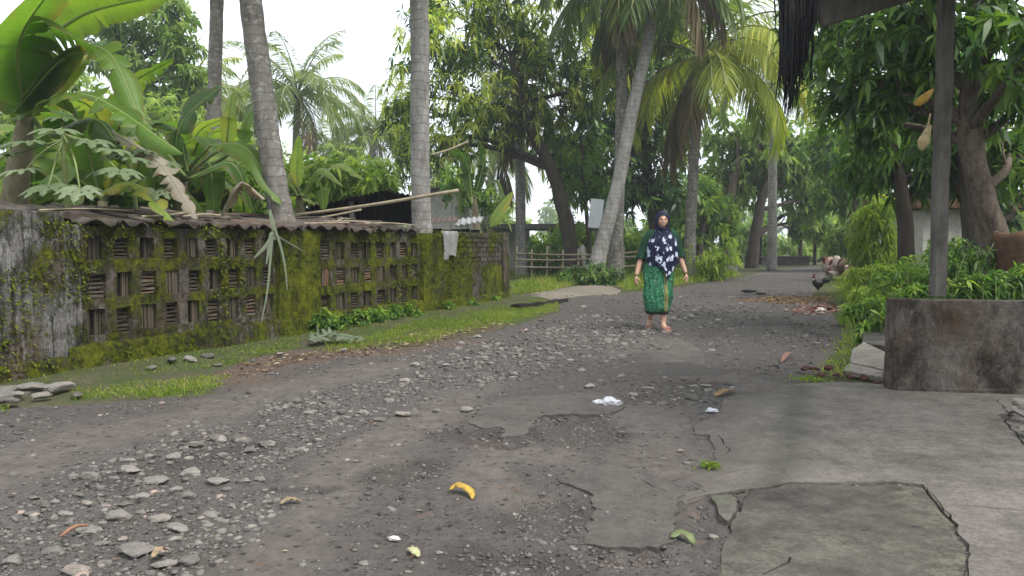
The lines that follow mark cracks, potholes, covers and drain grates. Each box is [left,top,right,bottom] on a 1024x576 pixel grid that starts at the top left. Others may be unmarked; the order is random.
pothole [522,416,620,446]
pothole [465,439,522,451]
